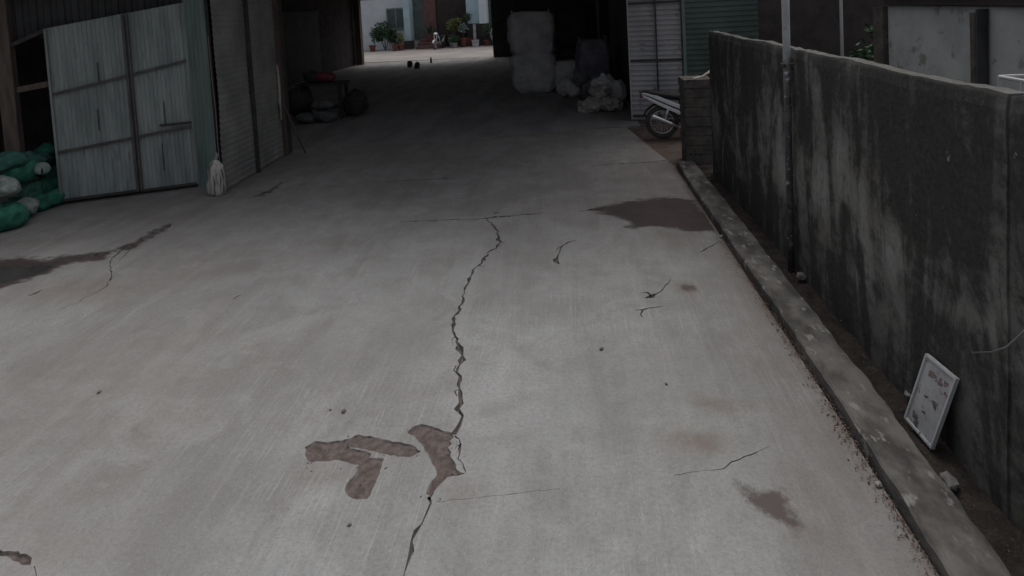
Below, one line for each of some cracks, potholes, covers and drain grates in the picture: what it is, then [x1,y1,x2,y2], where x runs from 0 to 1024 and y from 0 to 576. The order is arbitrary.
crack [2,225,171,312]
crack [640,279,671,318]
crack [553,240,576,264]
crack [403,489,551,576]
crack [405,212,539,473]
crack [678,446,770,475]
